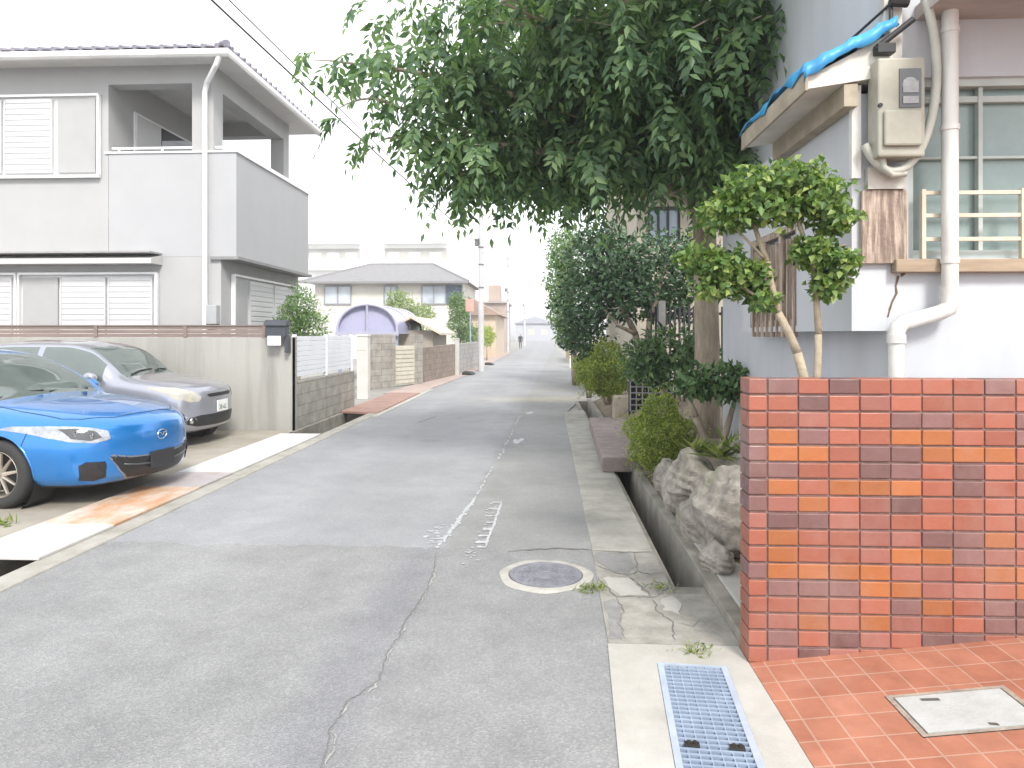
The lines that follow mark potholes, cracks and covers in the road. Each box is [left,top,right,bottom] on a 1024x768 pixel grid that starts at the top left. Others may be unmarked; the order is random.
utility cover [885,685,1024,738]
crack [595,550,700,640]
drain grate [657,662,765,768]
manhole cover [499,560,594,594]
crack [320,553,438,768]
